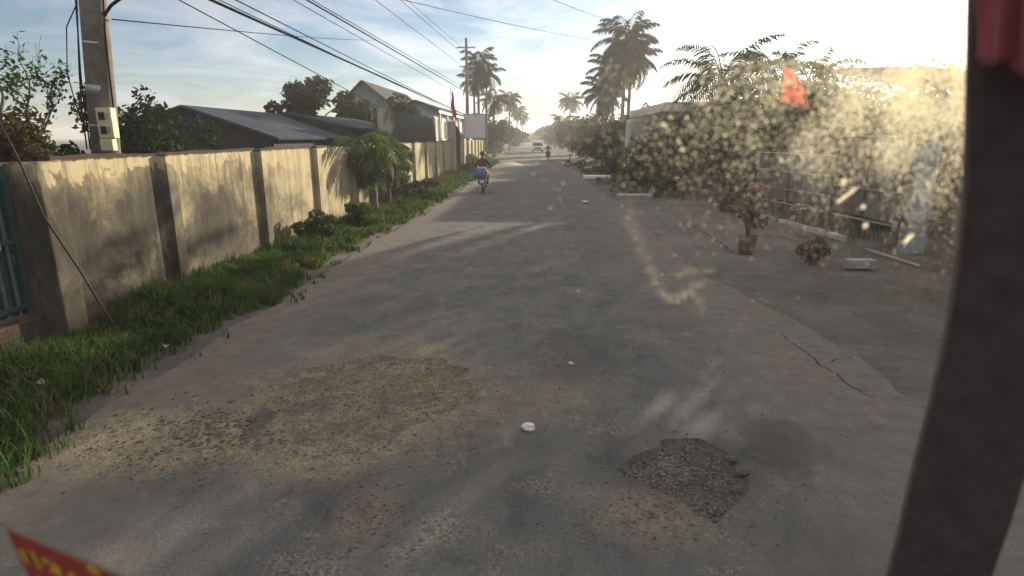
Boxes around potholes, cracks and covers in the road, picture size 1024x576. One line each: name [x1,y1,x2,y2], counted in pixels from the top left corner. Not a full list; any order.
pothole [616,438,750,524]
crack [780,333,874,399]
